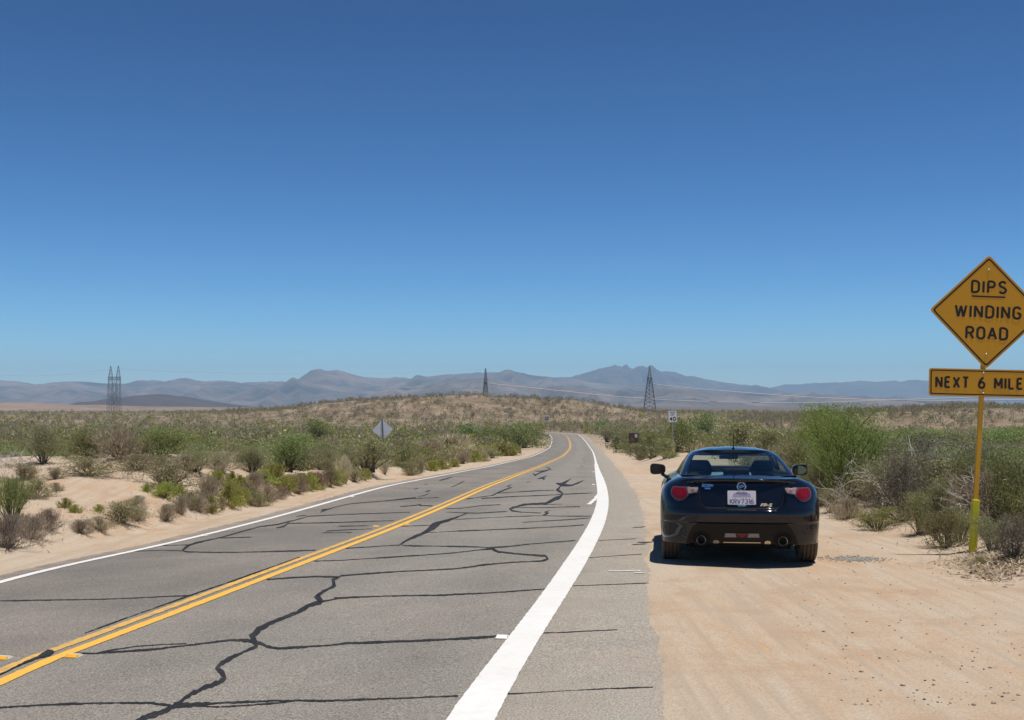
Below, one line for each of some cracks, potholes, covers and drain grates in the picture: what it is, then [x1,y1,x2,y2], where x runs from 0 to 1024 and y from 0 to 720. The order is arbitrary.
crack [124,458,645,561]
